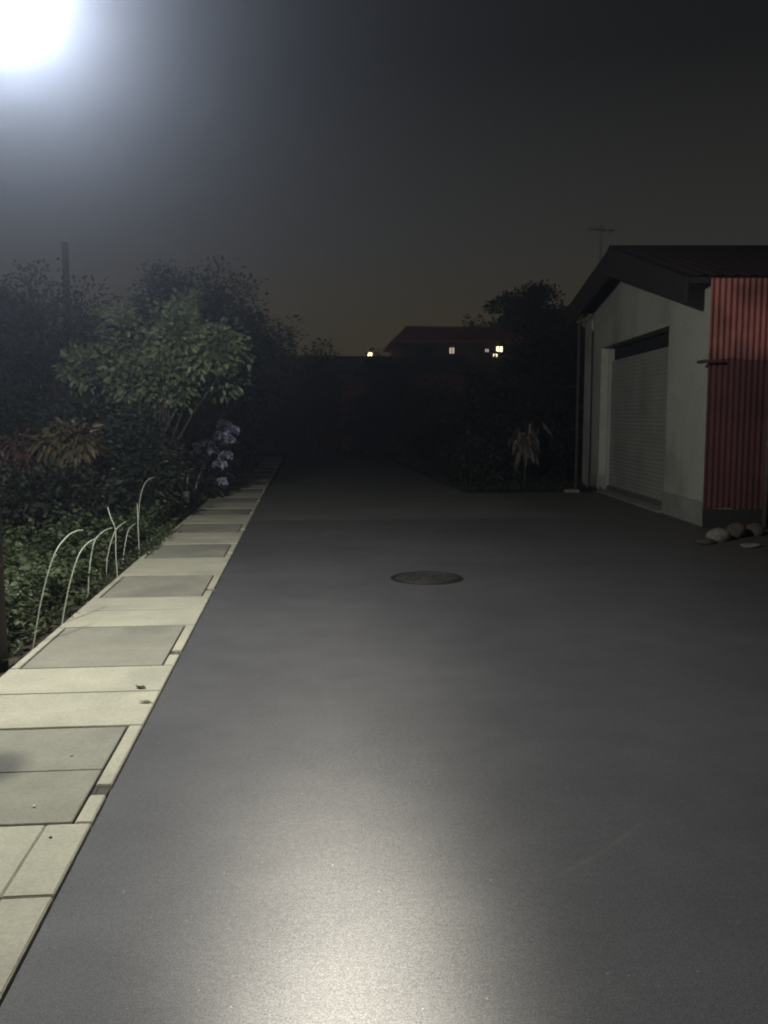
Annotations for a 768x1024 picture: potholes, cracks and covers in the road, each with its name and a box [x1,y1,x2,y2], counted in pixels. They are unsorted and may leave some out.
manhole cover [390,571,463,585]
